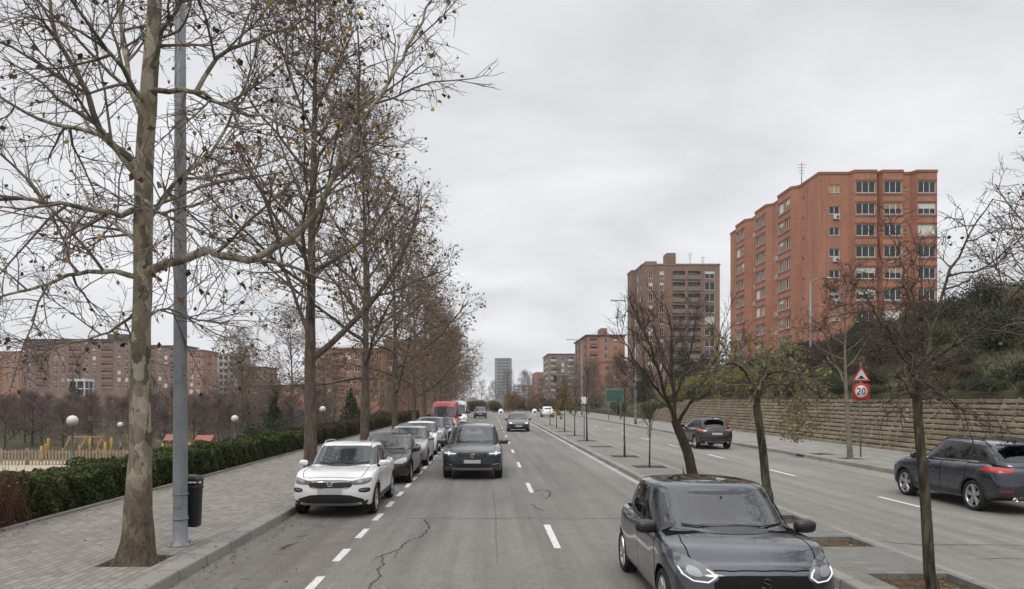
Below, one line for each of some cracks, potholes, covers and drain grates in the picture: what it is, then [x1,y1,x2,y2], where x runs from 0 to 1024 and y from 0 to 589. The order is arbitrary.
crack [474,489,610,560]
crack [368,519,430,589]
